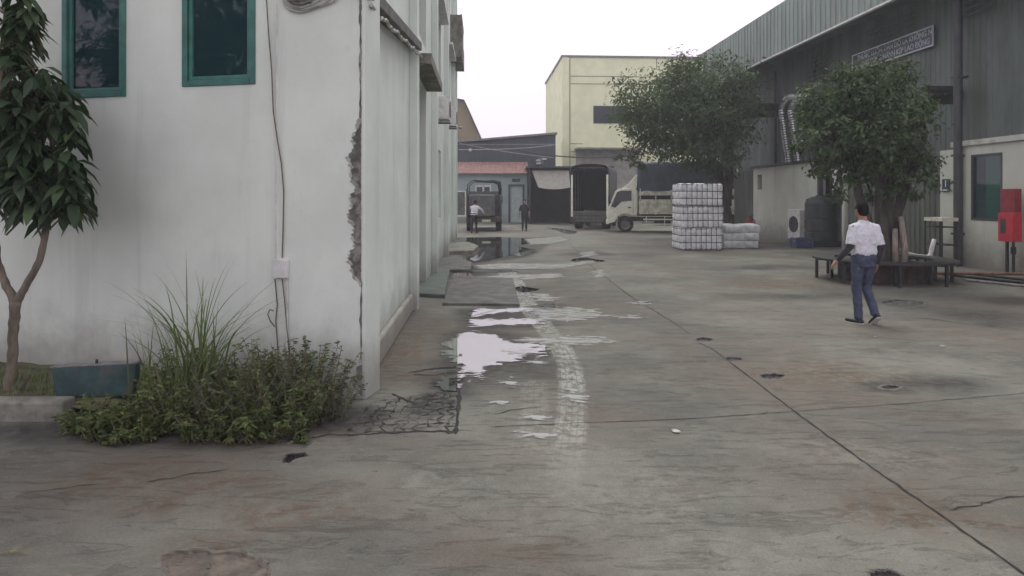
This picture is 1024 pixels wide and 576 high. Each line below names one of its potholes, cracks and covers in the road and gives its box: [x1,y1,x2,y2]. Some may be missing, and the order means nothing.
crack [949,496,1023,510]
crack [310,363,463,438]
pothole [277,451,312,466]
pothole [860,566,910,576]
pothole [756,372,788,380]
